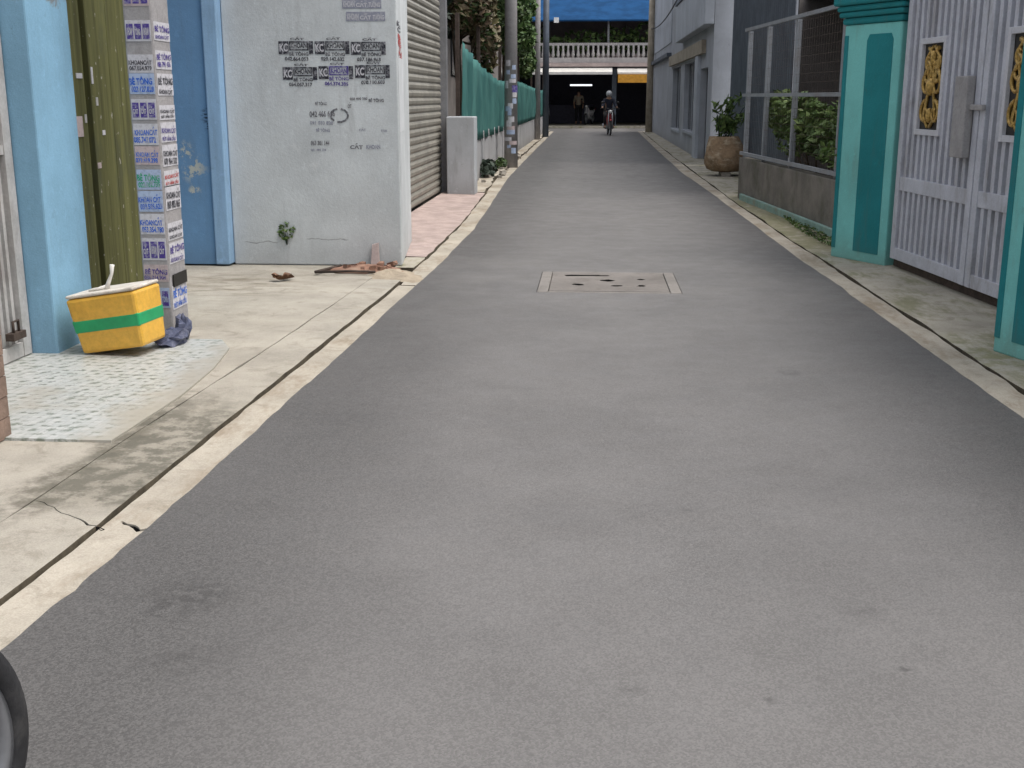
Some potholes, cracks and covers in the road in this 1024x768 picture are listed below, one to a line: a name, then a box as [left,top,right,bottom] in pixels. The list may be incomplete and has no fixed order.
manhole cover [537,272,682,294]
